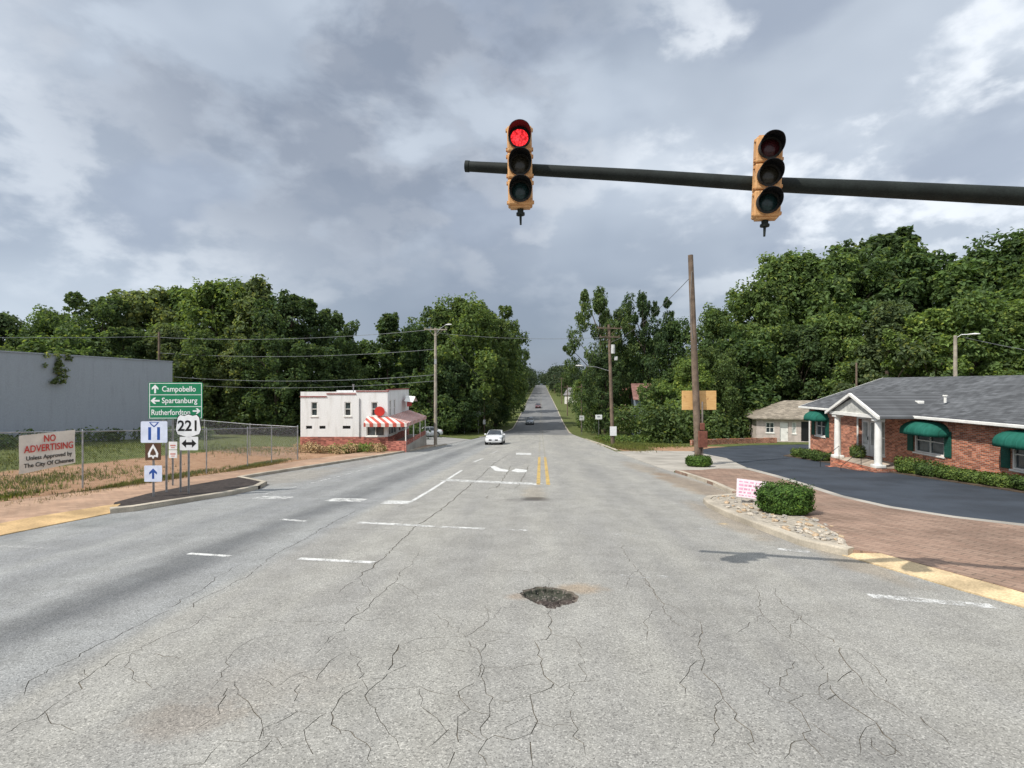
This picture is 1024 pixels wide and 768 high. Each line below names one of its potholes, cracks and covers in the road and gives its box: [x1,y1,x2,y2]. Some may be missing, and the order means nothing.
crack [6,616,212,733]
crack [736,587,950,759]
pothole [519,586,579,609]
crack [622,544,757,754]
crack [183,570,597,767]
